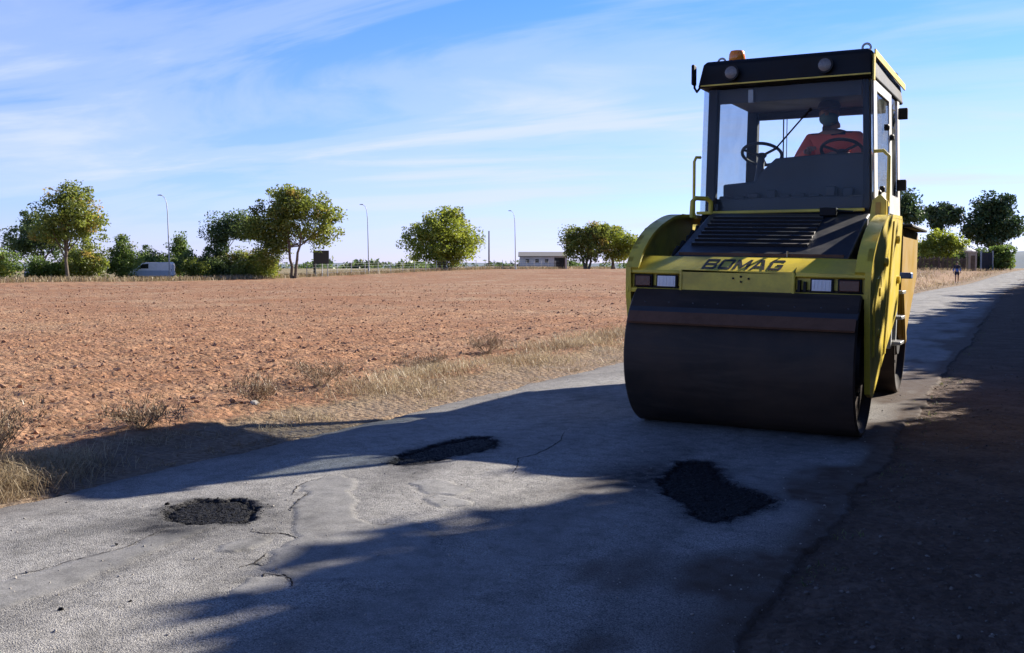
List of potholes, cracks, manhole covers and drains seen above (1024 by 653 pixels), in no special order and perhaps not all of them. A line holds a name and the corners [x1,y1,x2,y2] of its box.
pothole [647,459,779,523]
pothole [151,497,270,528]
crack [240,554,293,586]
crack [13,529,163,576]
pothole [381,436,500,468]
